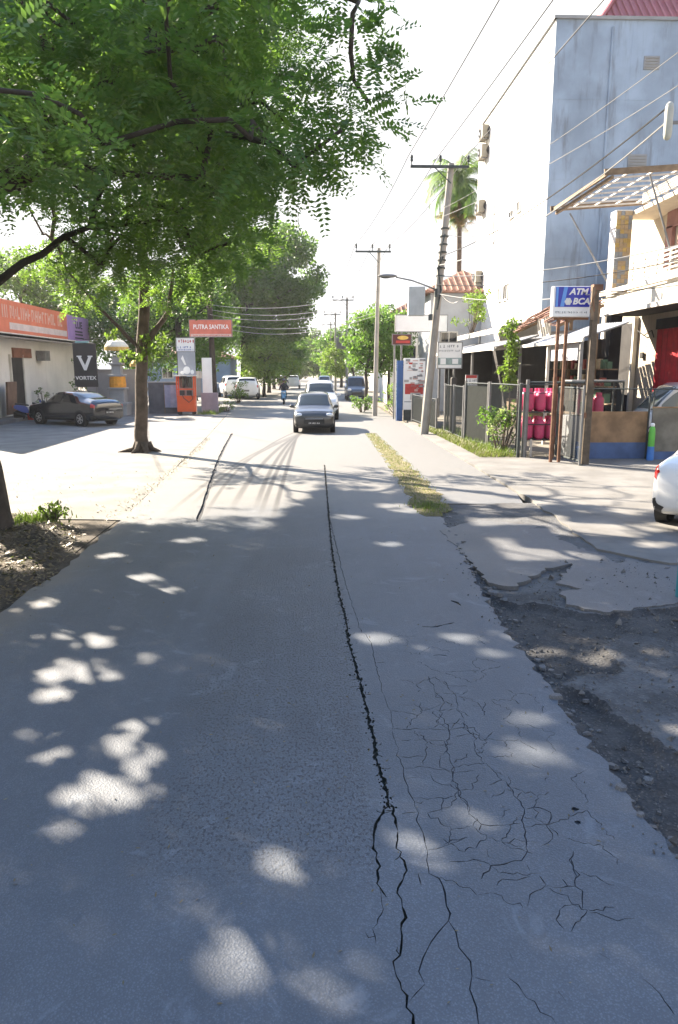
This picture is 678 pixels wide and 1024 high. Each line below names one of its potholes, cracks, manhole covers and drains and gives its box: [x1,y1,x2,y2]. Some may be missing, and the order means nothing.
crack [331,524,674,1024]
pothole [553,685,678,854]
pothole [483,591,678,687]
